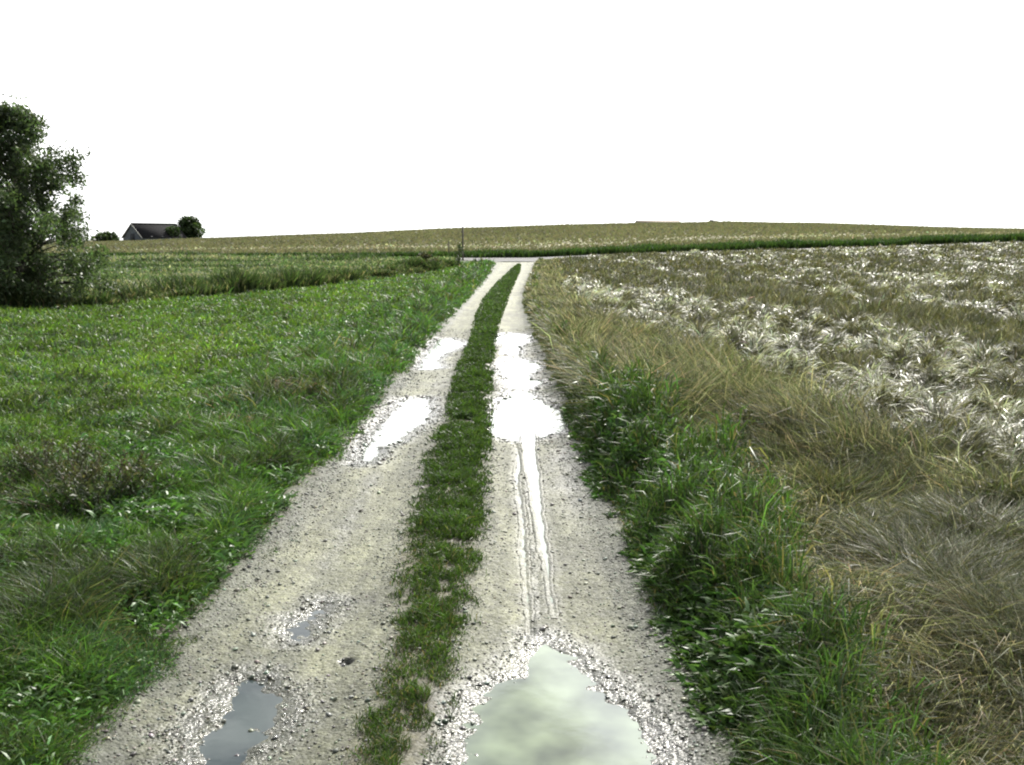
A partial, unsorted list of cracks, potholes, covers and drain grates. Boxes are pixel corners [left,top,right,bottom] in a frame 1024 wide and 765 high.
pothole [274,597,341,647]
pothole [349,396,440,467]
pothole [442,631,692,765]
pothole [495,332,534,356]
pothole [414,337,468,370]
pothole [485,389,568,443]
pothole [494,355,551,390]
pothole [170,669,308,765]
